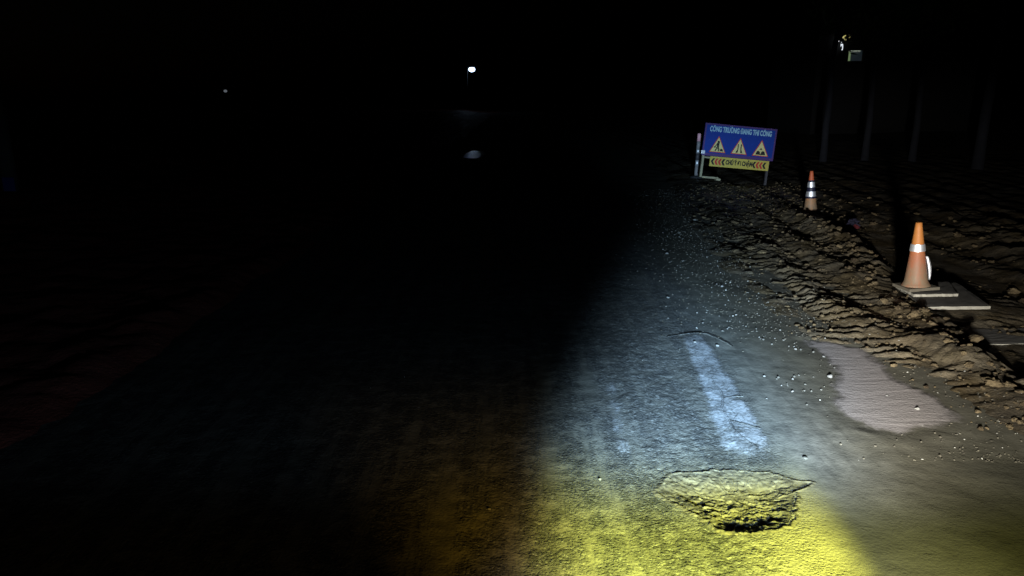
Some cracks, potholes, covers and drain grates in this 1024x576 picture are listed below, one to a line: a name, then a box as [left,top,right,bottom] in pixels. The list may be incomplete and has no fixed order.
pothole [651,469,817,537]
crack [667,332,733,347]
